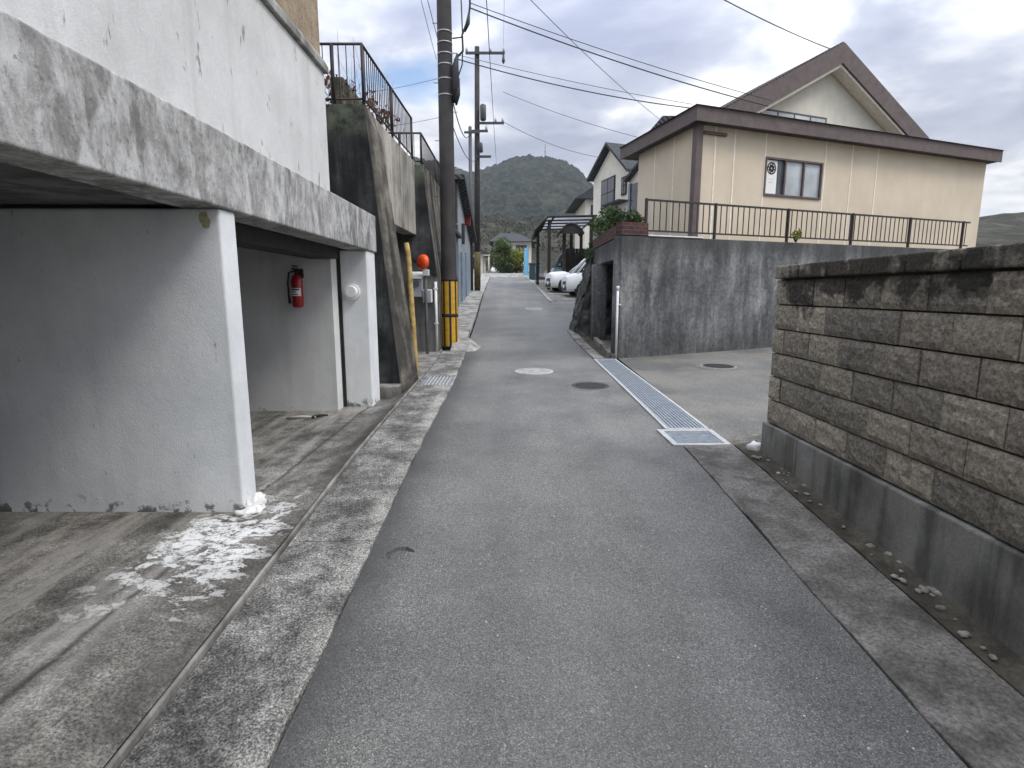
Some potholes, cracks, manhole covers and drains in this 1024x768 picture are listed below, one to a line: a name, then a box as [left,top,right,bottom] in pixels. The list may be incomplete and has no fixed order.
drain grate [594,359,709,429]
drain grate [656,429,731,447]
manhole cover [694,363,745,371]
manhole cover [566,381,615,391]
drain grate [421,376,455,385]
